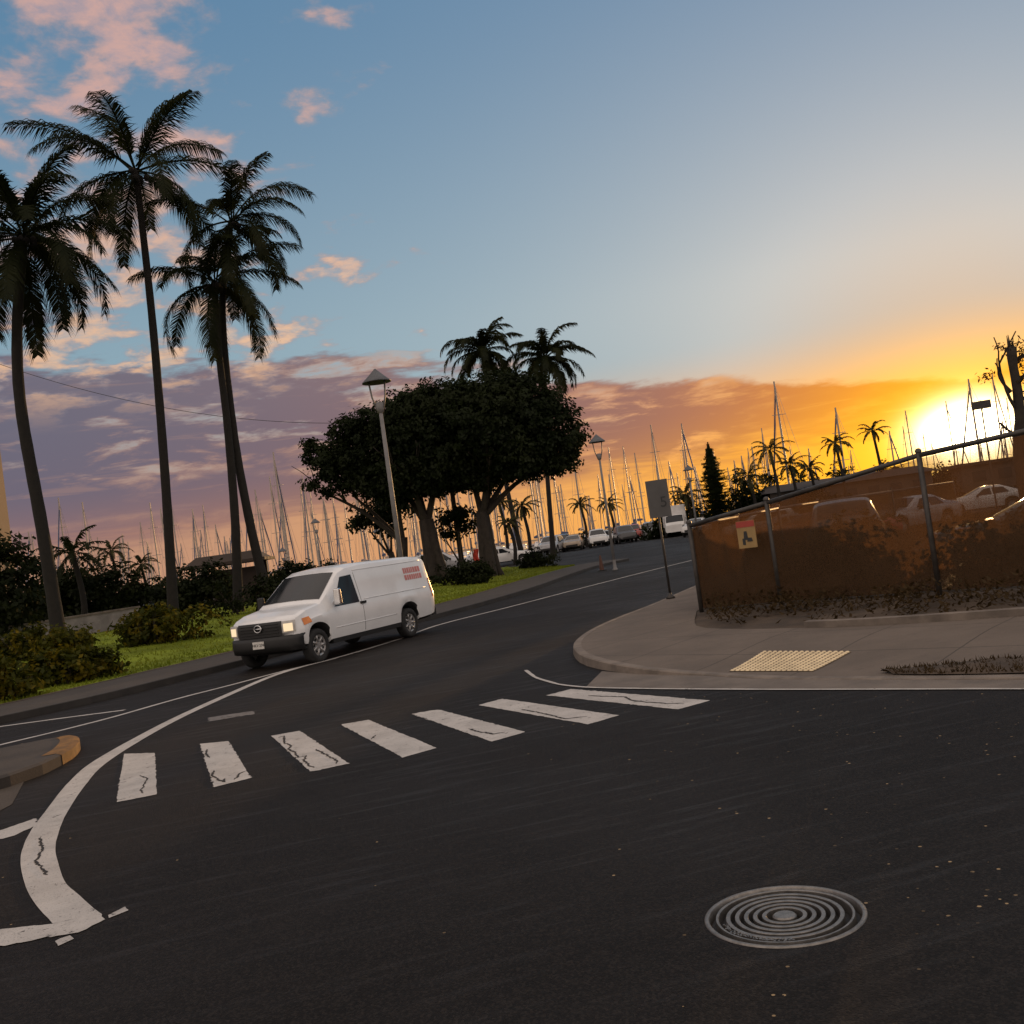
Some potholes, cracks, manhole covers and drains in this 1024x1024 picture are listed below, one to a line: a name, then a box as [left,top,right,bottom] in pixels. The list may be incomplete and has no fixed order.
crack [34,837,48,875]
crack [588,695,669,704]
crack [205,749,244,782]
crack [278,736,338,767]
manhole cover [704,885,868,949]
